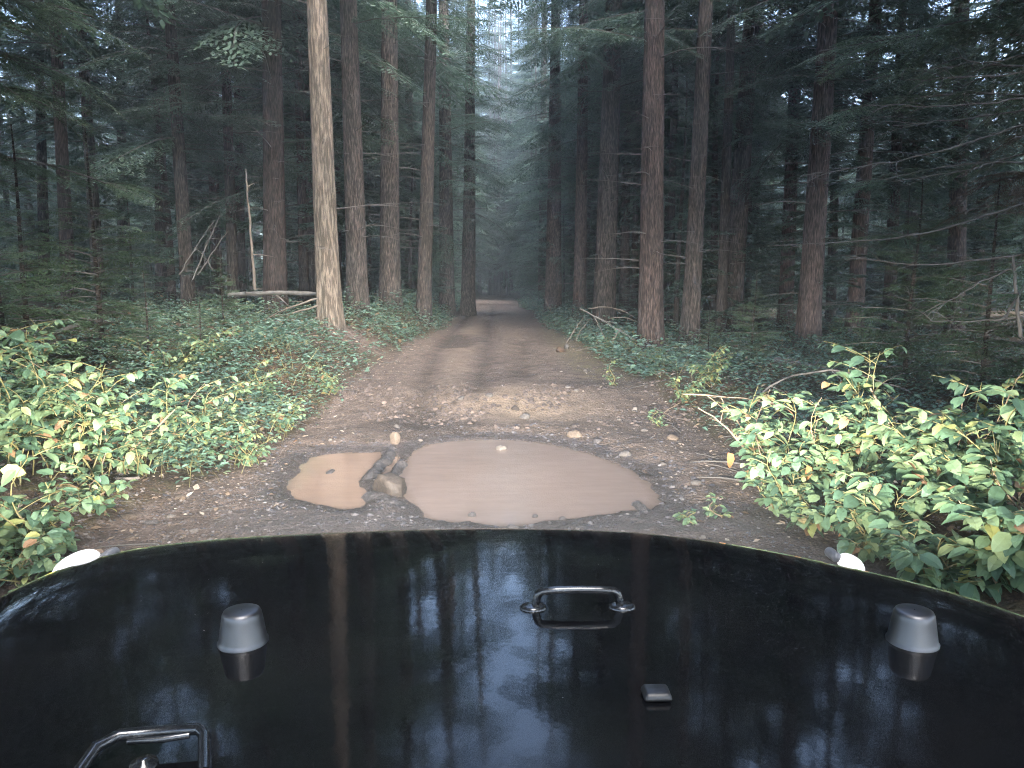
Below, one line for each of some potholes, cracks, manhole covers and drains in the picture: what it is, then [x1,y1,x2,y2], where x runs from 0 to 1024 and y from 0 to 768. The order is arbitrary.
pothole [398,436,667,527]
pothole [275,447,387,510]
